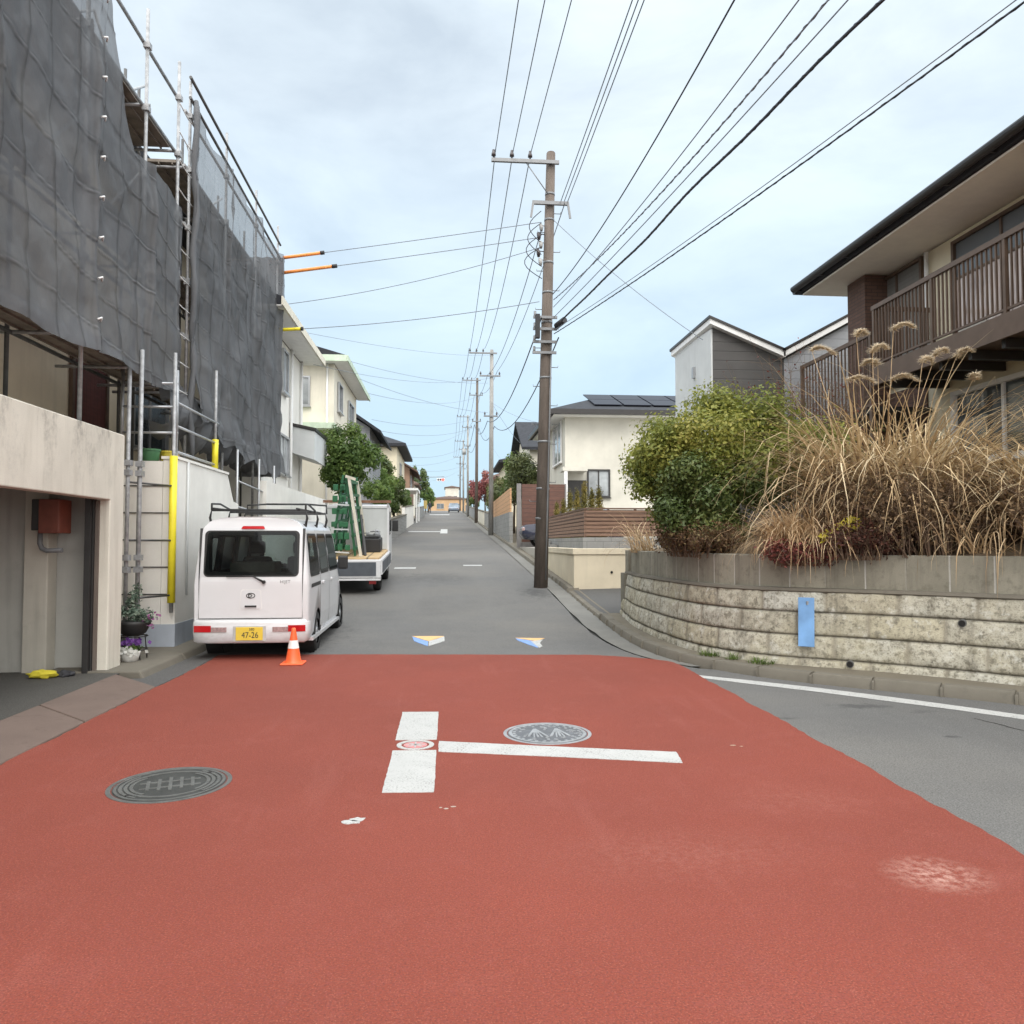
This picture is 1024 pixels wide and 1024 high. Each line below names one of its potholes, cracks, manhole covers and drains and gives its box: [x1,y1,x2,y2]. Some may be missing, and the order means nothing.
manhole cover [105,767,232,804]
manhole cover [503,723,592,745]
